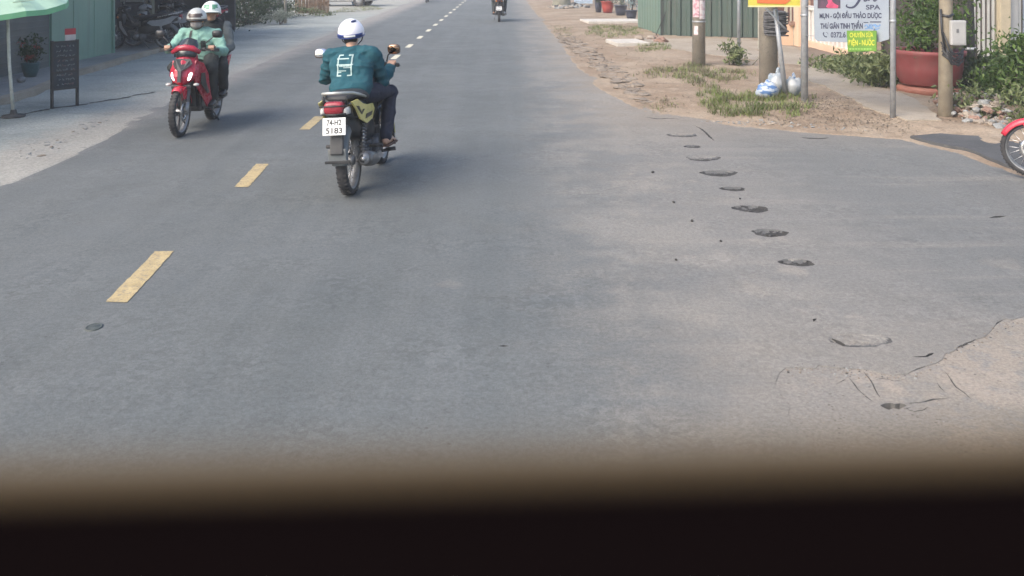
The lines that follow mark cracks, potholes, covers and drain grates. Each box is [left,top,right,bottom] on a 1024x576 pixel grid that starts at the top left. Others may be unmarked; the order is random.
pothole [828,333,892,347]
pothole [731,205,768,213]
manhole cover [85,323,103,332]
pothole [752,229,789,237]
crack [837,353,972,412]
